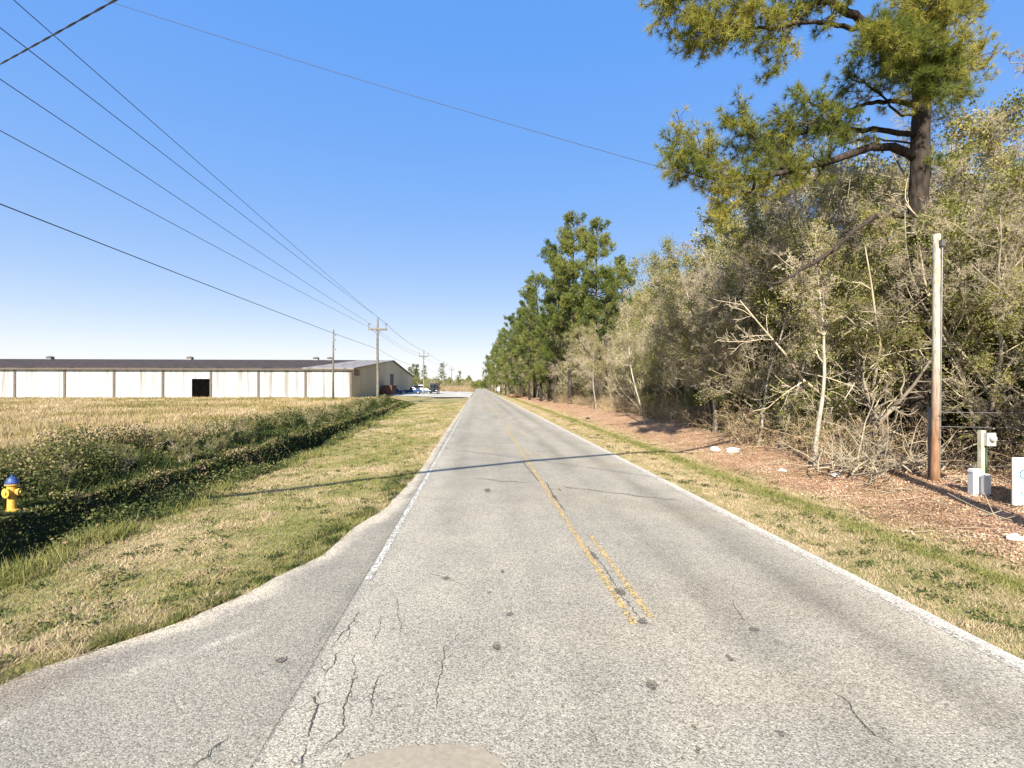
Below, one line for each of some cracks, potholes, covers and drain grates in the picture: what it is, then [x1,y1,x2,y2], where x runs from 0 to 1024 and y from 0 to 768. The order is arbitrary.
crack [282,596,412,768]
crack [829,690,897,747]
crack [479,461,673,510]
